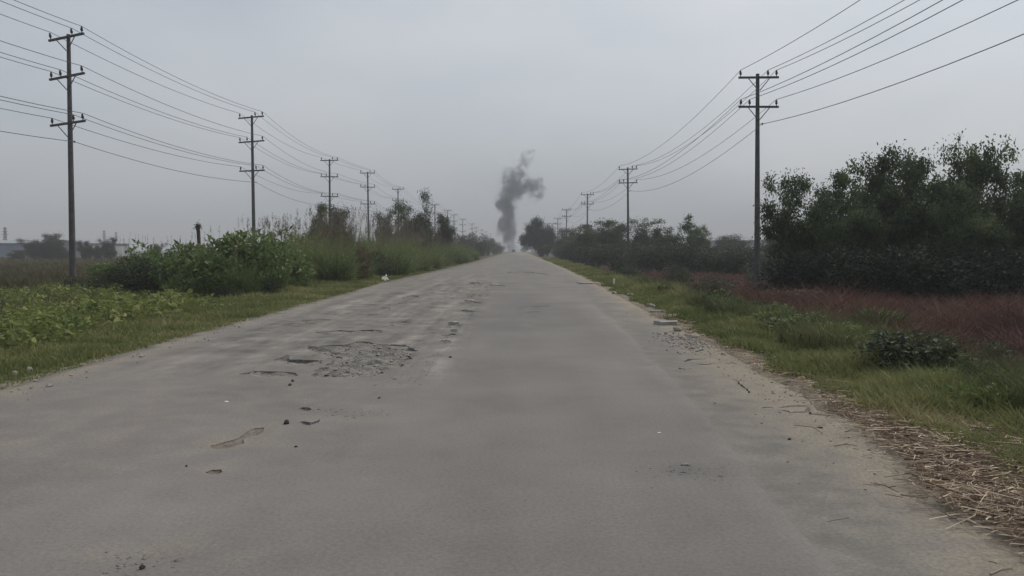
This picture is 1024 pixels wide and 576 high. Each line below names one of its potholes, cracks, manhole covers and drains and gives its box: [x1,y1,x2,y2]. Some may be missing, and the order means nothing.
pothole [211,428,264,449]
pothole [307,341,418,378]
pothole [275,355,322,366]
